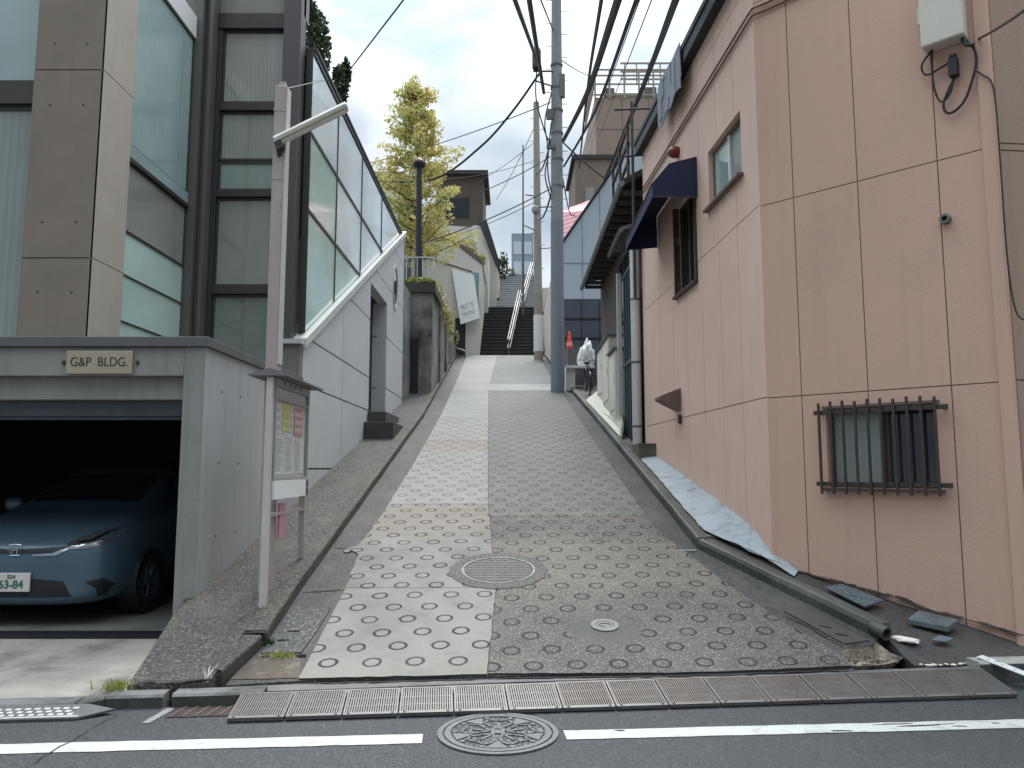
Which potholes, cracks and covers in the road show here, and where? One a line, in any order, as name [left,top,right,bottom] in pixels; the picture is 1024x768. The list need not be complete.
drain grate [798,673,872,703]
drain grate [399,686,453,717]
drain grate [454,684,508,715]
drain grate [227,691,294,722]
drain grate [937,668,1018,699]
drain grate [891,669,970,700]
drain grate [555,681,616,712]
drain grate [505,683,562,713]
manhole cover [449,553,547,590]
drain grate [165,705,235,718]
manhole cover [437,713,559,756]
drain grate [845,671,921,702]
